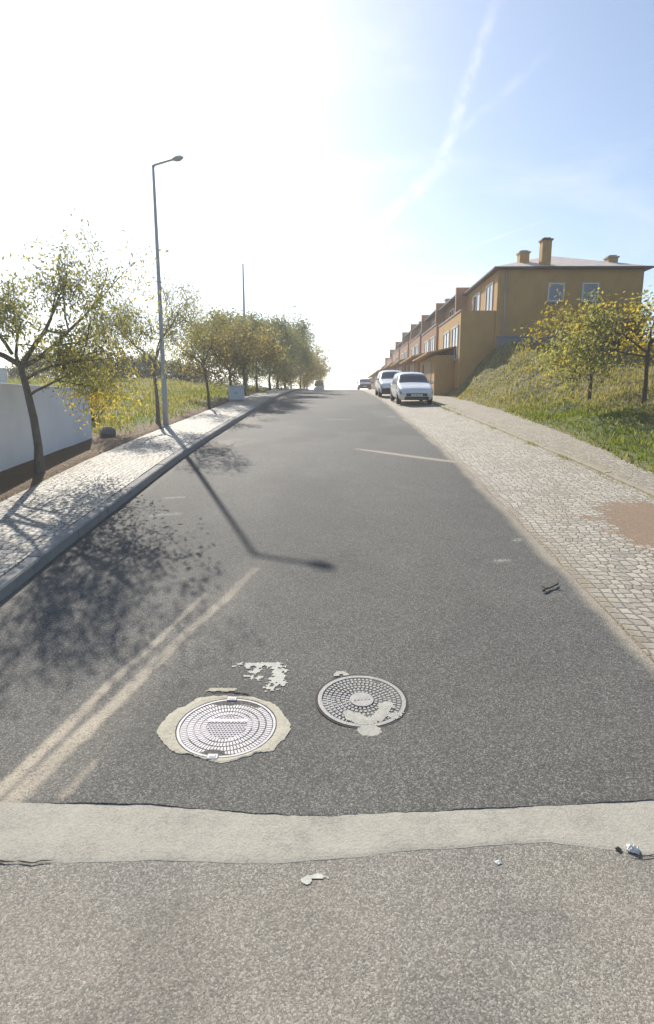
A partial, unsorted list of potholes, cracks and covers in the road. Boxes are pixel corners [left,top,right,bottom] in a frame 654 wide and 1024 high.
manhole cover [315,671,410,736]
manhole cover [157,687,291,764]
